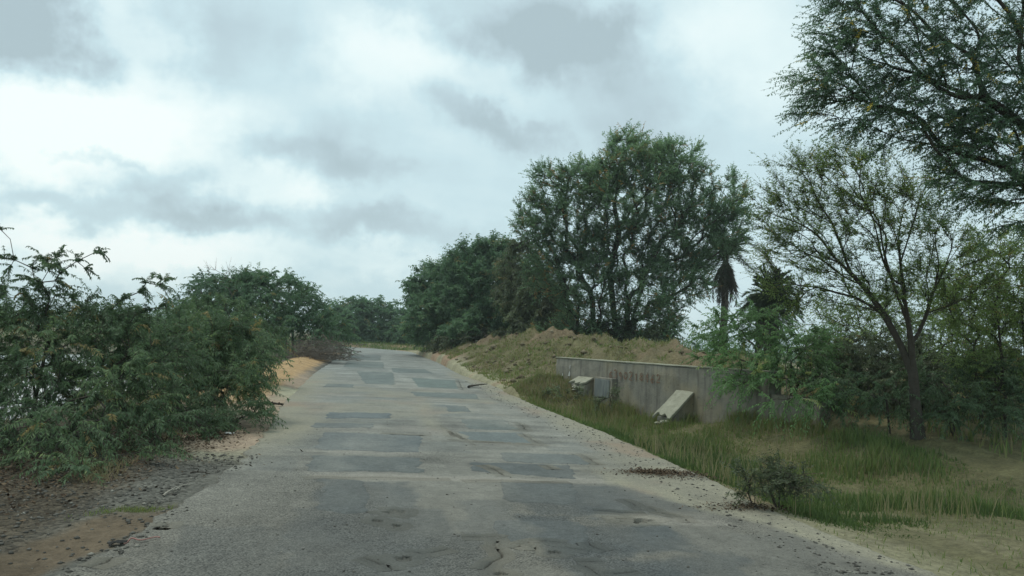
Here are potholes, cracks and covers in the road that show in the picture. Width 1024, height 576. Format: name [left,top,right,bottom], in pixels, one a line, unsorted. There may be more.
crack [352,533,646,576]
